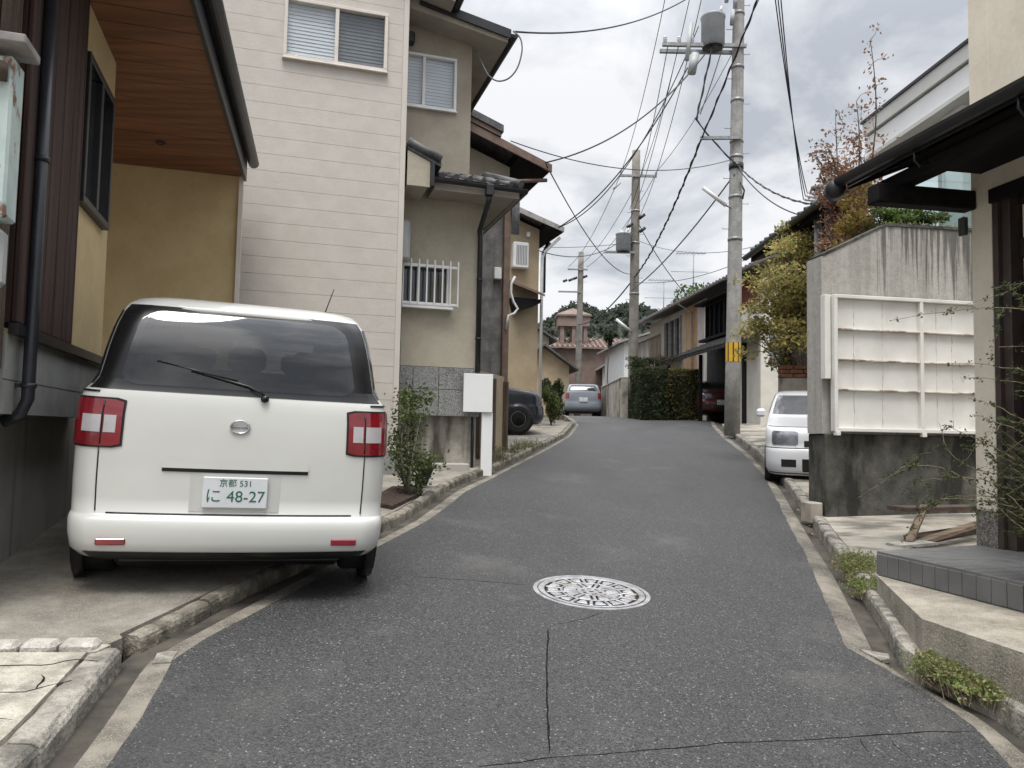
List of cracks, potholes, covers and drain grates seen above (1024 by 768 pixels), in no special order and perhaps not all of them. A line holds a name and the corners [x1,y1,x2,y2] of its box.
crack [479,613,973,767]
manhole cover [533,575,651,614]
